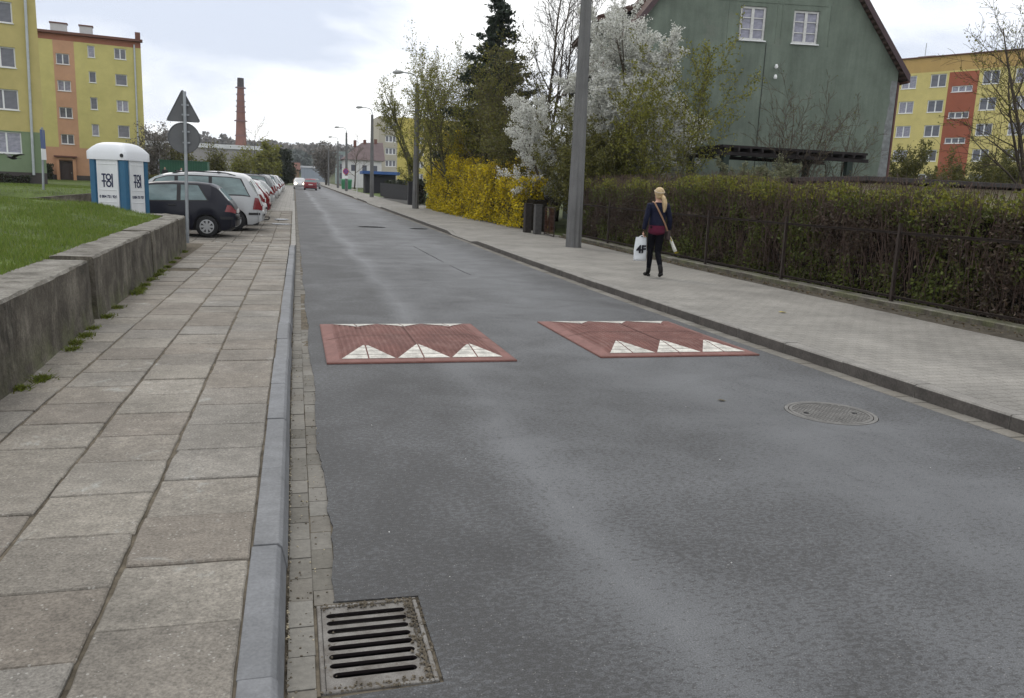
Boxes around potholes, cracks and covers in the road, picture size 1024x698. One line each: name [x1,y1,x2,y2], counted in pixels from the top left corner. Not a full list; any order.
manhole cover [784,401,879,425]
drain grate [313,597,444,698]
